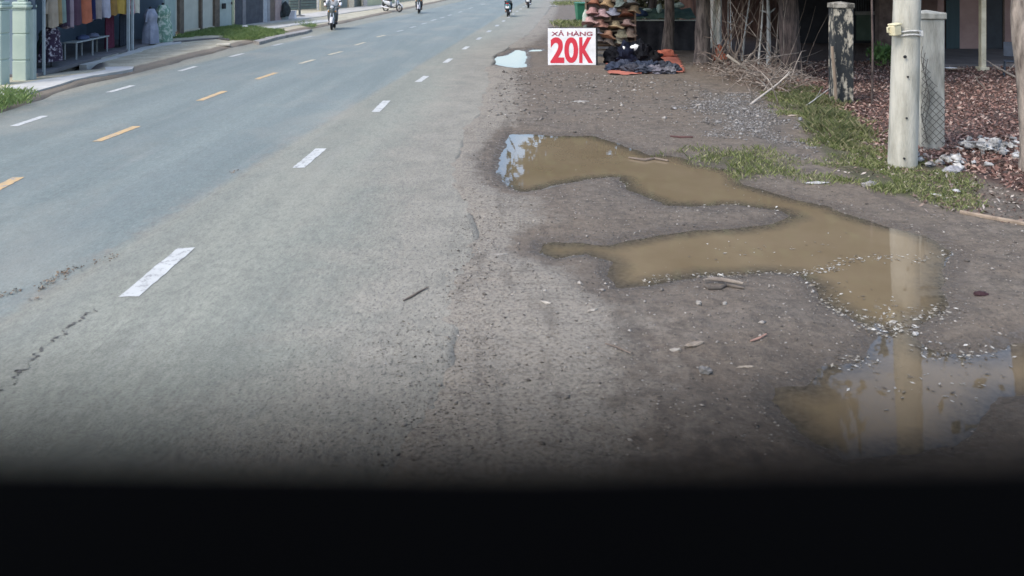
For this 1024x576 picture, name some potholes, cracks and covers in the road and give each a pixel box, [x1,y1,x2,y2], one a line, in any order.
pothole [749,328,1024,405]
crack [0,308,97,391]
pothole [489,132,967,333]
pothole [494,49,531,68]
